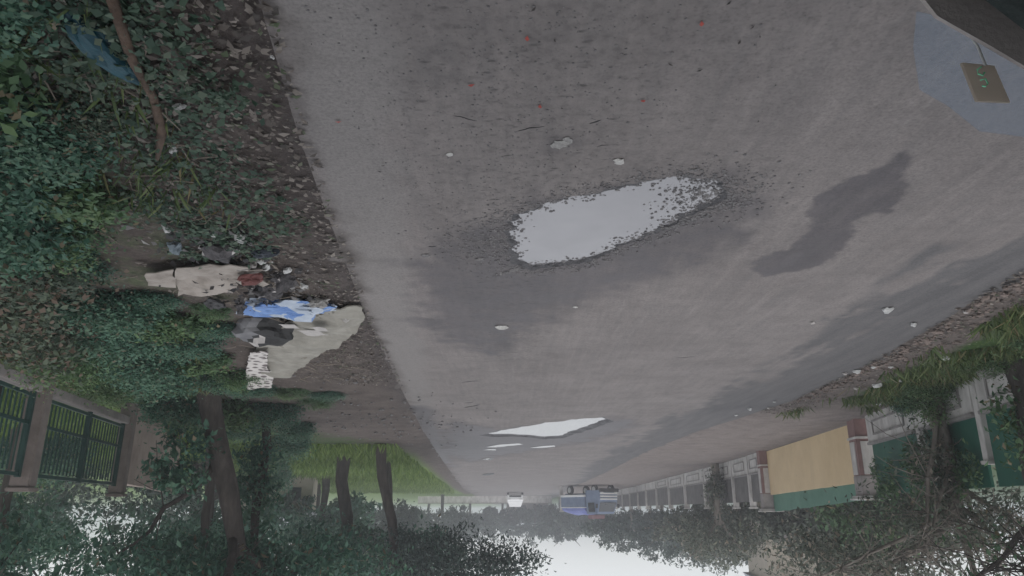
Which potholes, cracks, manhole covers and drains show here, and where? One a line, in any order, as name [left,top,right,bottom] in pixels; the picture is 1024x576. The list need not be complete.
pothole [504,175,727,271]
pothole [481,417,613,439]
